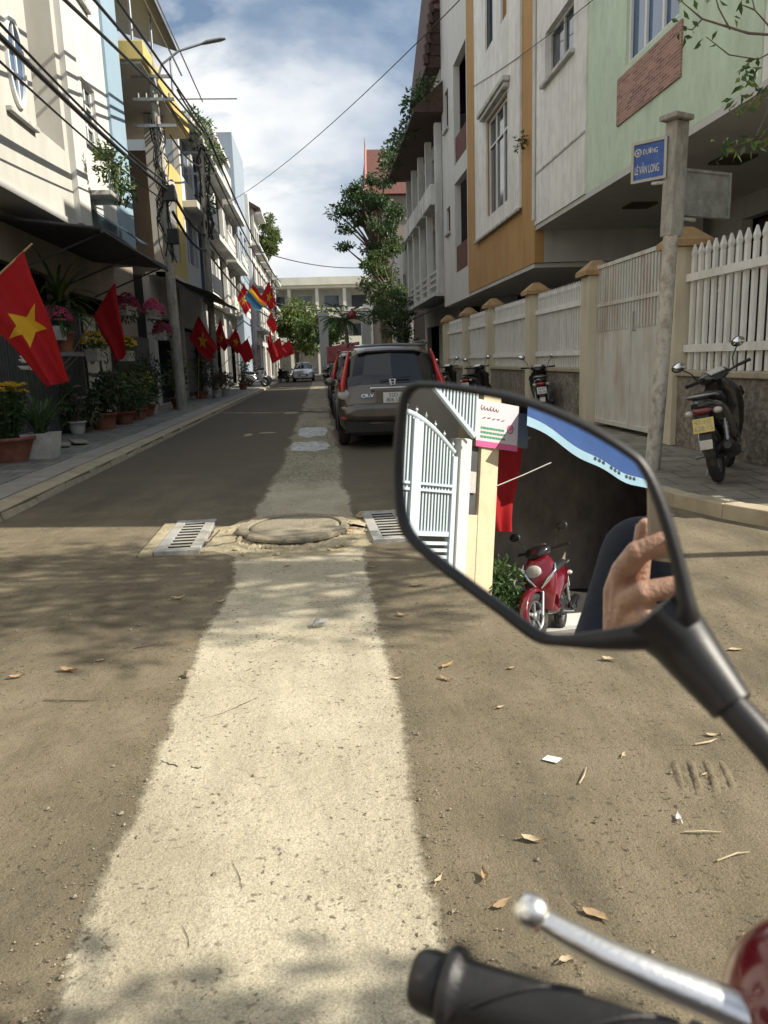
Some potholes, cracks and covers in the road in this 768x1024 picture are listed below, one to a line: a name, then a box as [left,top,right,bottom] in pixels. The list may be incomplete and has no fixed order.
manhole cover [215,513,373,560]
